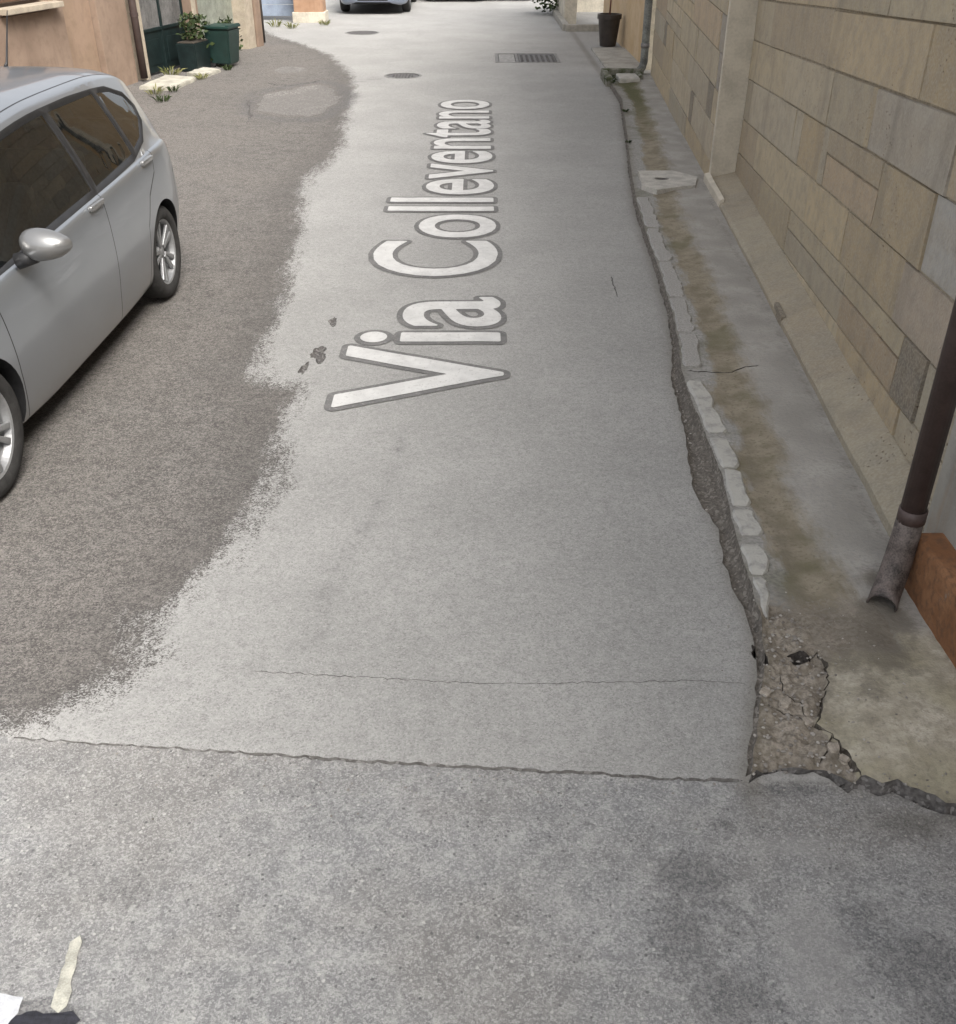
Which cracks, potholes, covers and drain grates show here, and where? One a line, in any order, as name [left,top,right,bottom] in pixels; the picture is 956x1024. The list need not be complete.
pothole [310,346,327,364]
crack [688,365,758,373]
crack [256,671,744,684]
pothole [787,651,811,666]
